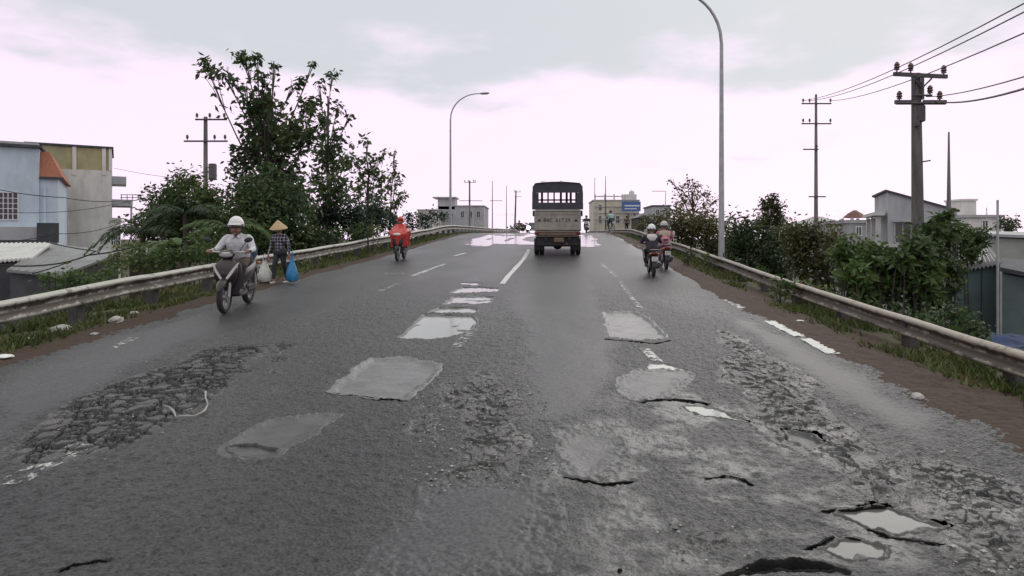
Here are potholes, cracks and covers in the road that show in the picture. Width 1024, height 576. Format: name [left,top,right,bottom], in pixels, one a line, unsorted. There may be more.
pothole [821,503,950,536]
pothole [682,405,748,423]
pothole [816,535,891,562]
pothole [216,412,344,461]
pothole [721,557,852,576]
crack [60,560,108,573]
crack [641,329,1024,576]
crack [564,477,633,486]
pothole [781,429,831,448]
